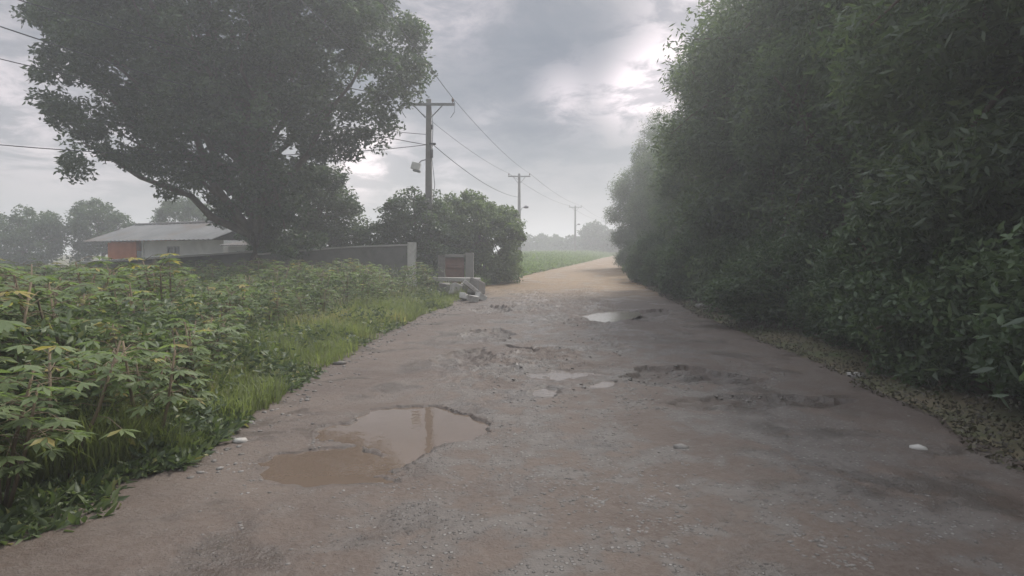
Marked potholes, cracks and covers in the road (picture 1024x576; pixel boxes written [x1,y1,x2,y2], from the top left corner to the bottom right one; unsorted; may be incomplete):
pothole [457,328,520,344]
pothole [523,384,565,397]
pothole [618,365,770,387]
pothole [577,310,642,322]
pothole [579,378,627,389]
pothole [252,442,405,490]
pothole [631,308,675,323]
pothole [310,404,492,476]
pothole [468,305,515,314]
pothole [520,367,608,382]
pothole [662,393,859,412]
